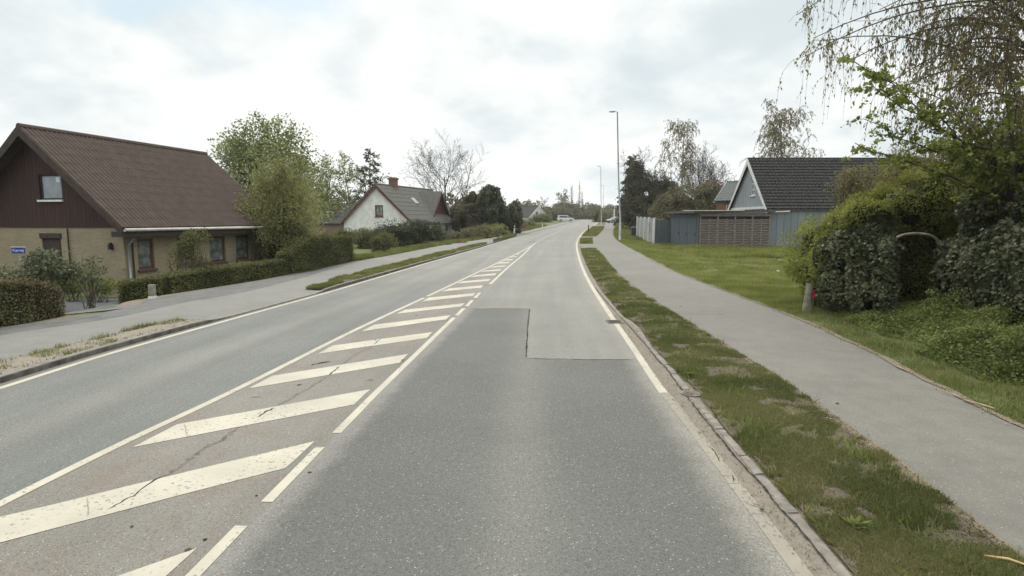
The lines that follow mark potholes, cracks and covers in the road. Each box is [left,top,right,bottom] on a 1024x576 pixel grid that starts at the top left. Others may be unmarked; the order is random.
crack [106,425,242,510]
crack [259,340,379,416]
